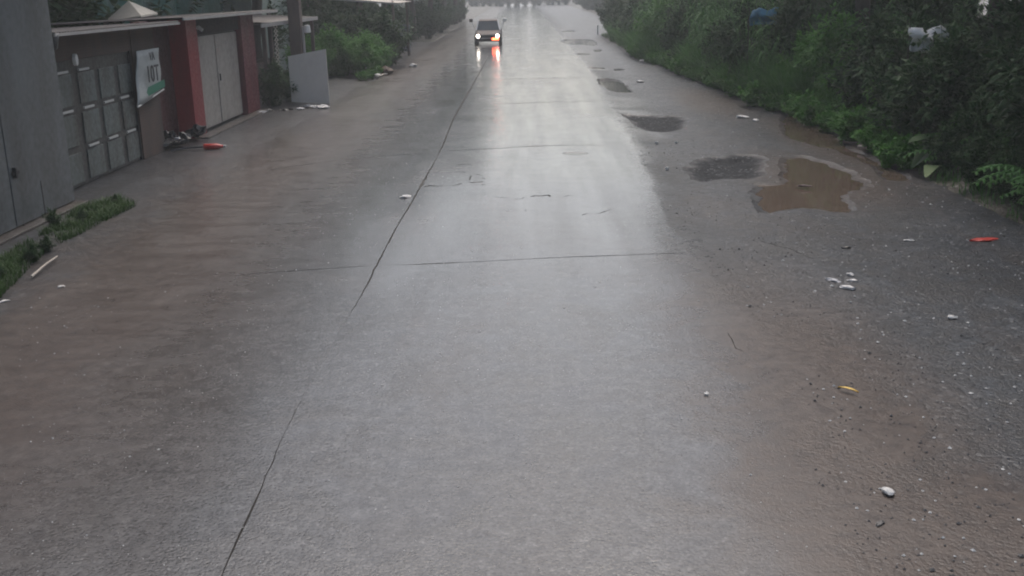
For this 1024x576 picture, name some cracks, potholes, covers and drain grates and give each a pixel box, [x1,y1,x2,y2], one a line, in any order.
crack [425,164,608,215]
pothole [682,154,769,182]
pothole [778,113,912,181]
pothole [621,114,691,132]
pothole [747,155,874,213]
pothole [597,78,634,93]
